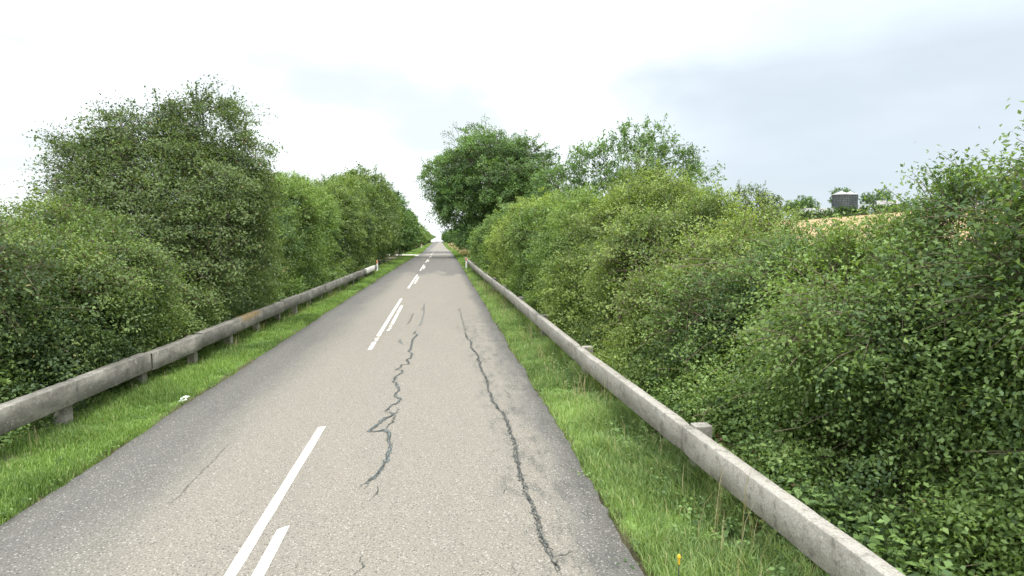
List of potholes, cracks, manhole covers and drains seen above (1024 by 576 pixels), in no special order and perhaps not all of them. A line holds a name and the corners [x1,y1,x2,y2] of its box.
crack [361,304,425,499]
crack [457,309,578,575]
